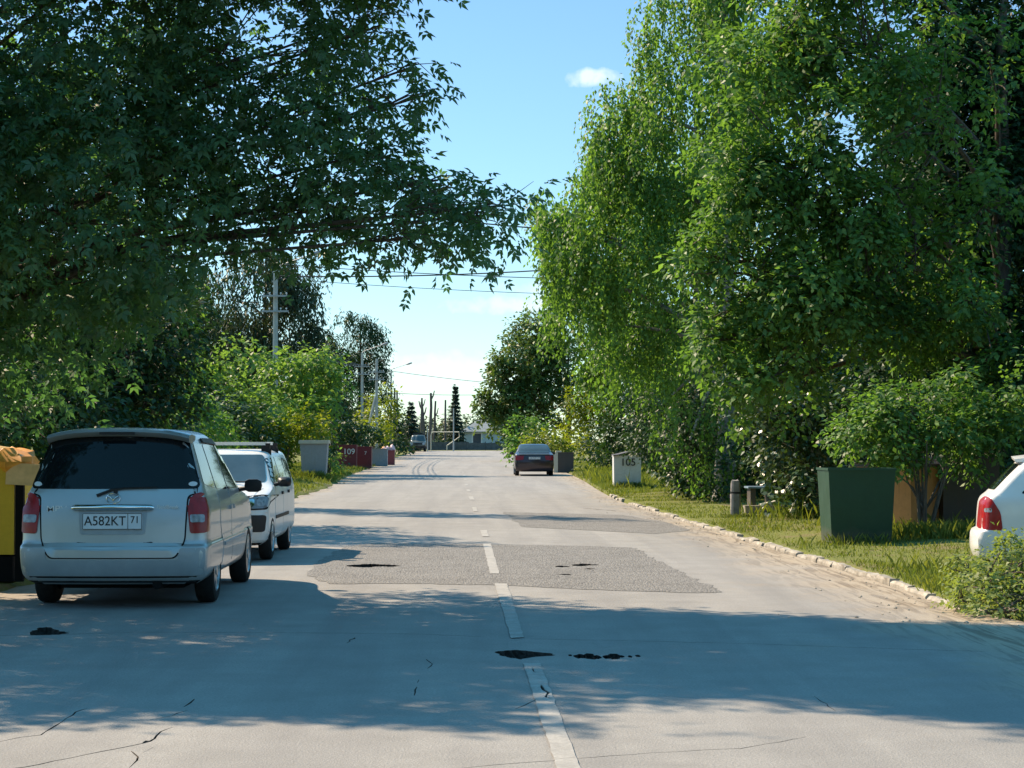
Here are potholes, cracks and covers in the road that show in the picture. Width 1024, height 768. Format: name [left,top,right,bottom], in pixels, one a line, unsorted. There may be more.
crack [19,699,195,768]
pothole [30,627,68,635]
pothole [495,650,553,659]
crack [467,737,803,768]
crack [0,708,87,742]
